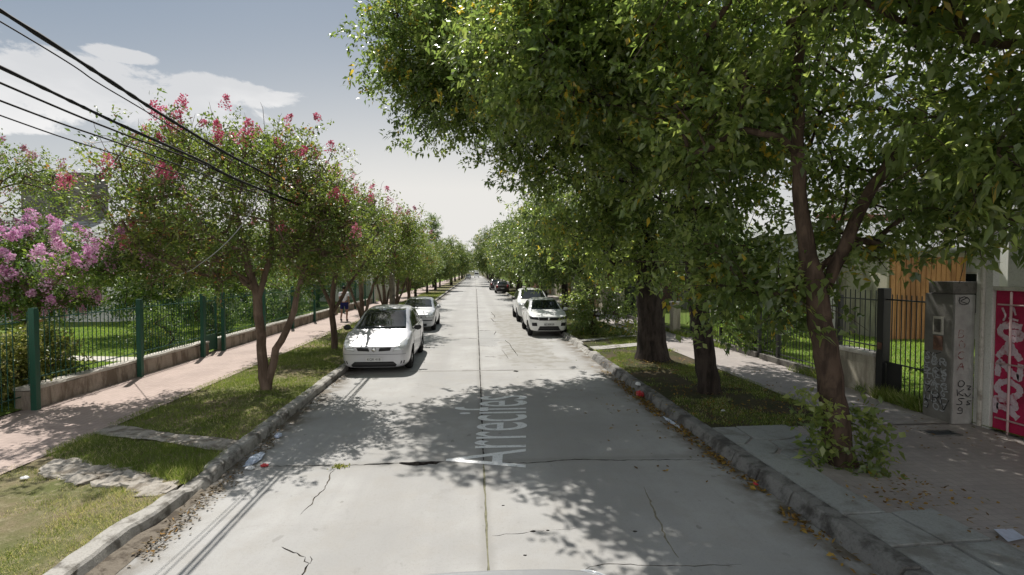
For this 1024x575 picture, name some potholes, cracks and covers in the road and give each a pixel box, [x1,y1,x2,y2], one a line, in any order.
crack [587,488,742,569]
crack [255,463,394,514]
crack [282,547,312,575]
